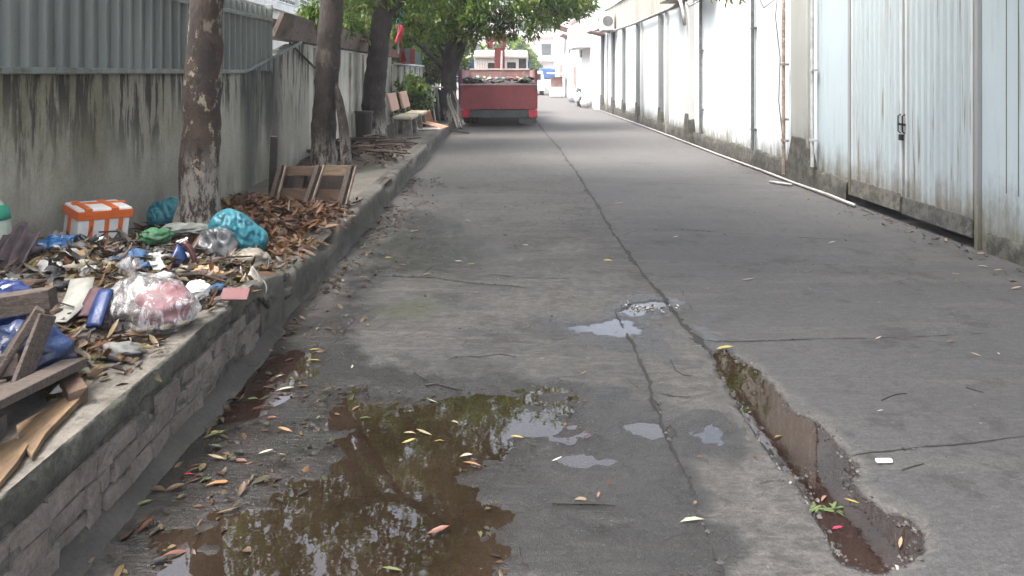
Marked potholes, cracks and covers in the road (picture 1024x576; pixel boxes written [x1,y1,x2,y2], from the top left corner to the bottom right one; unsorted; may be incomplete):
pothole [711,349,929,574]
crack [372,265,535,288]
crack [615,286,1016,493]
